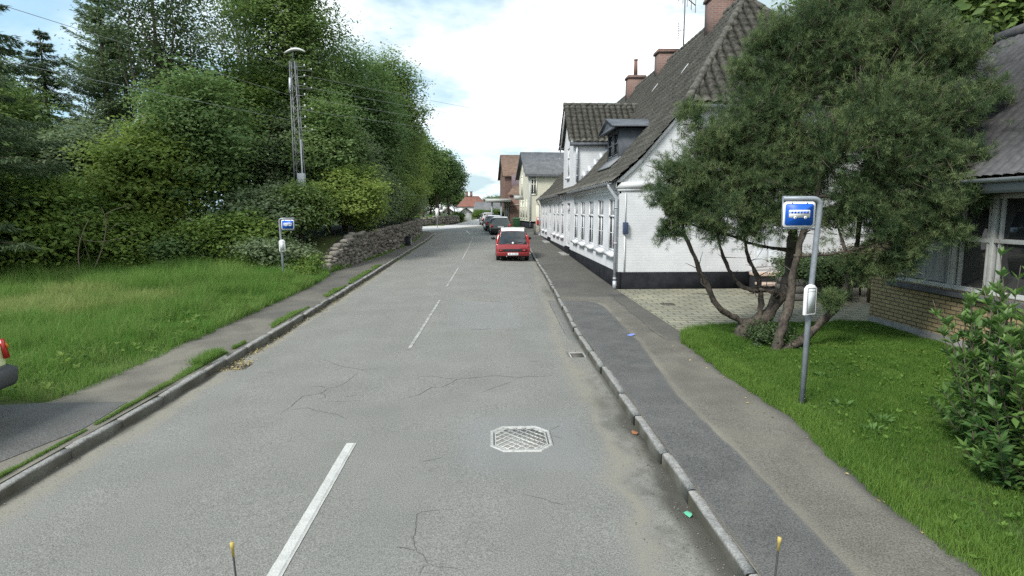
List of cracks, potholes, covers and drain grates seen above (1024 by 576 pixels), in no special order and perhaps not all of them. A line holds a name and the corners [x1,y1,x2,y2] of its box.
crack [403,509,458,572]
manhole cover [490,425,553,452]
